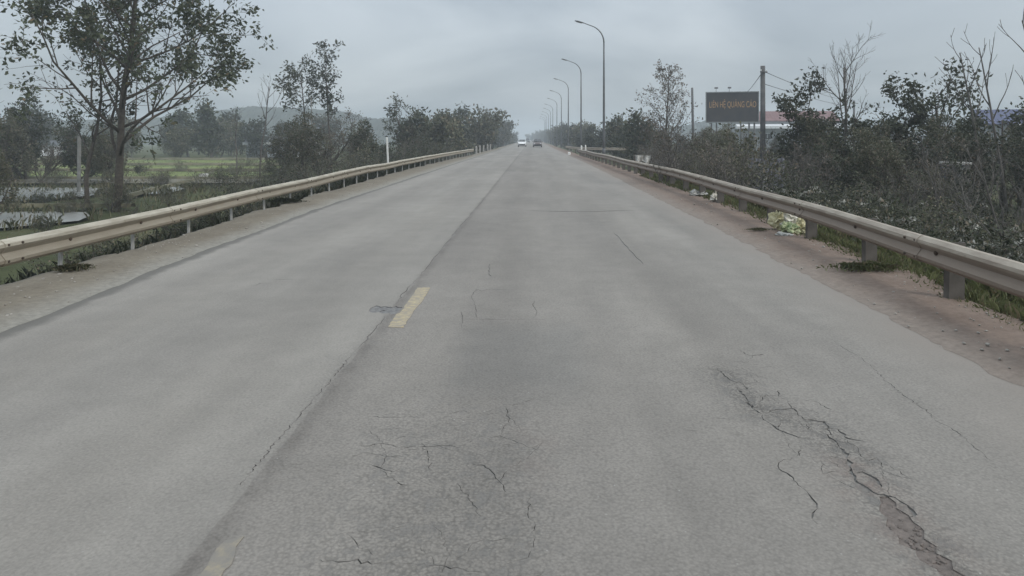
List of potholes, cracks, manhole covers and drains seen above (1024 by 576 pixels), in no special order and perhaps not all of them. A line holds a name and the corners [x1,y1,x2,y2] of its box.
crack [321,484,548,576]
crack [353,399,542,515]
crack [689,341,990,576]
crack [461,264,554,327]
